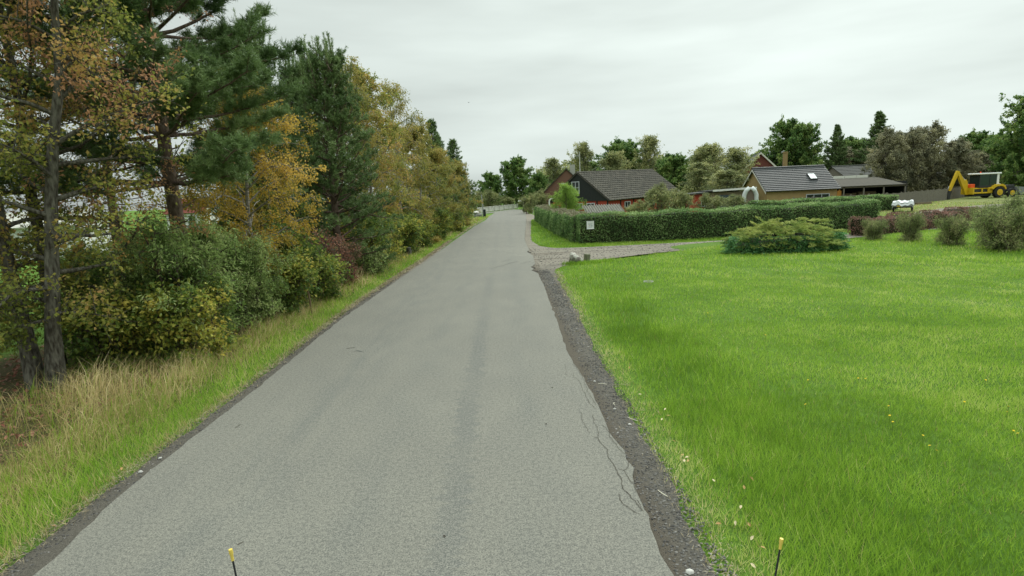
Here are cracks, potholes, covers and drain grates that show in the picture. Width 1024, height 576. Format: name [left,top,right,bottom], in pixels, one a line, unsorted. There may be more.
crack [565,367,642,514]
